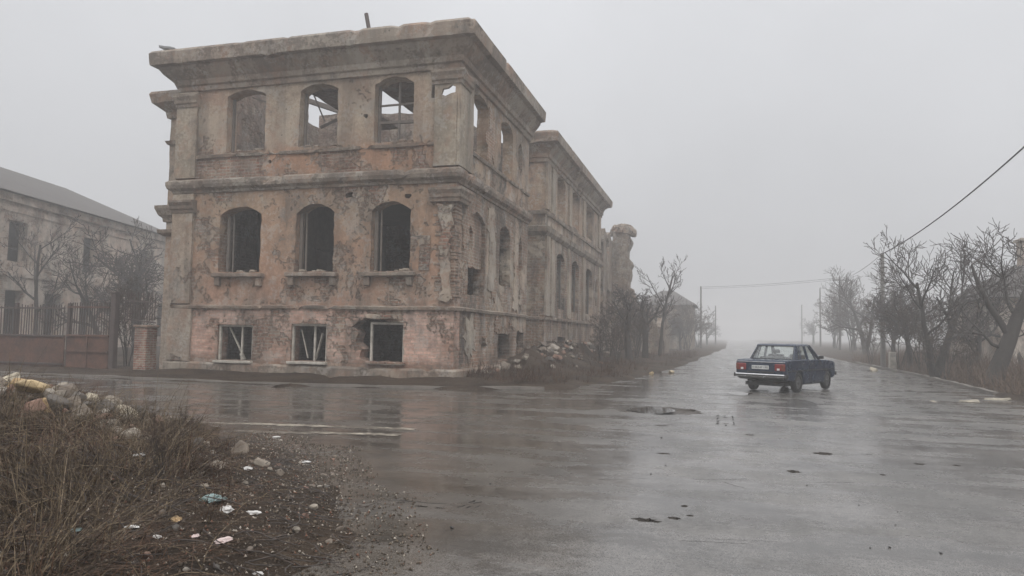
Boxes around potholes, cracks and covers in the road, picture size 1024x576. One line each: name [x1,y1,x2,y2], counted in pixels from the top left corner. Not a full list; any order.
pothole [625,406,703,415]
